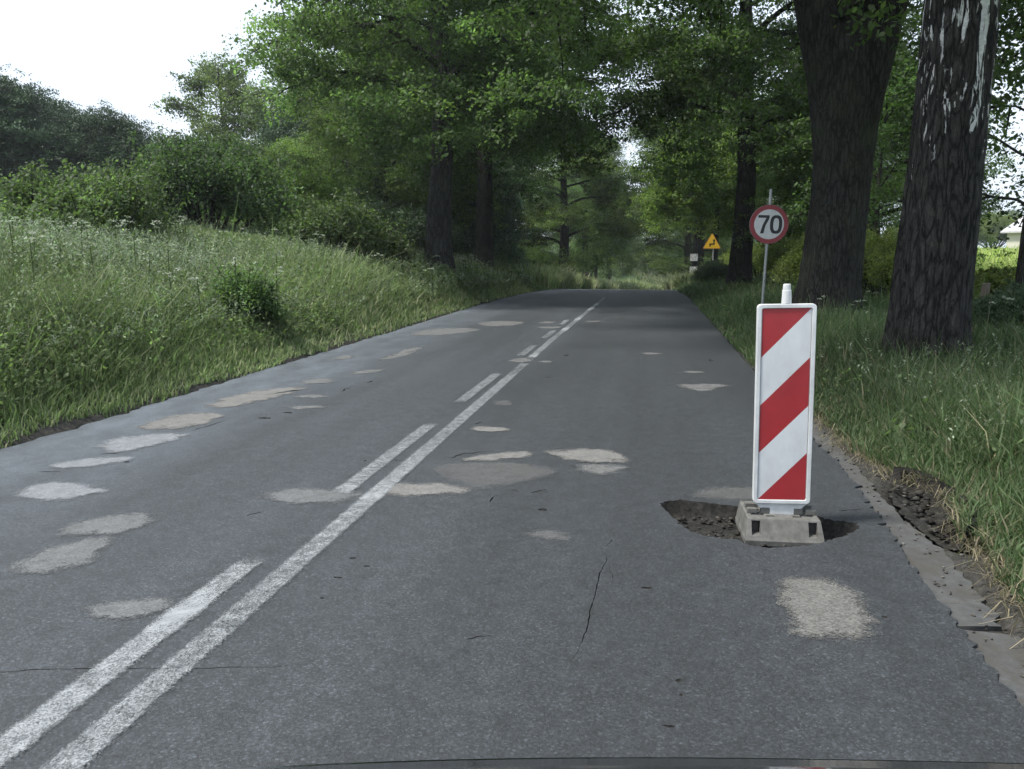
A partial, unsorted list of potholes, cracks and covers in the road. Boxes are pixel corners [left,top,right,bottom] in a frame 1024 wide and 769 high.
pothole [660,499,860,548]
crack [566,540,613,667]
